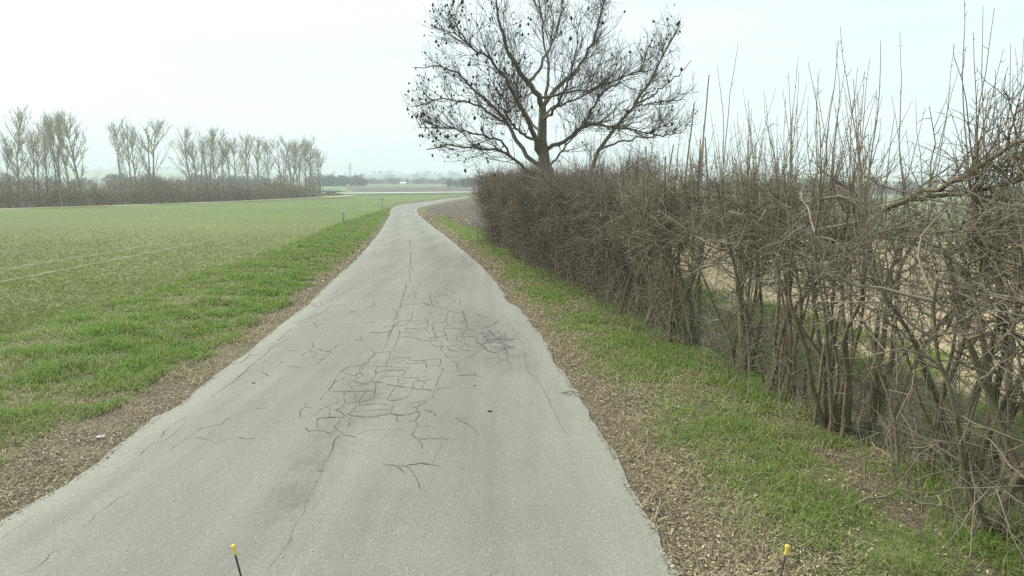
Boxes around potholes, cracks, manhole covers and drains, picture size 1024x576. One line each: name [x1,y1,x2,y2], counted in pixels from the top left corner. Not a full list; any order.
crack [299,240,515,447]
